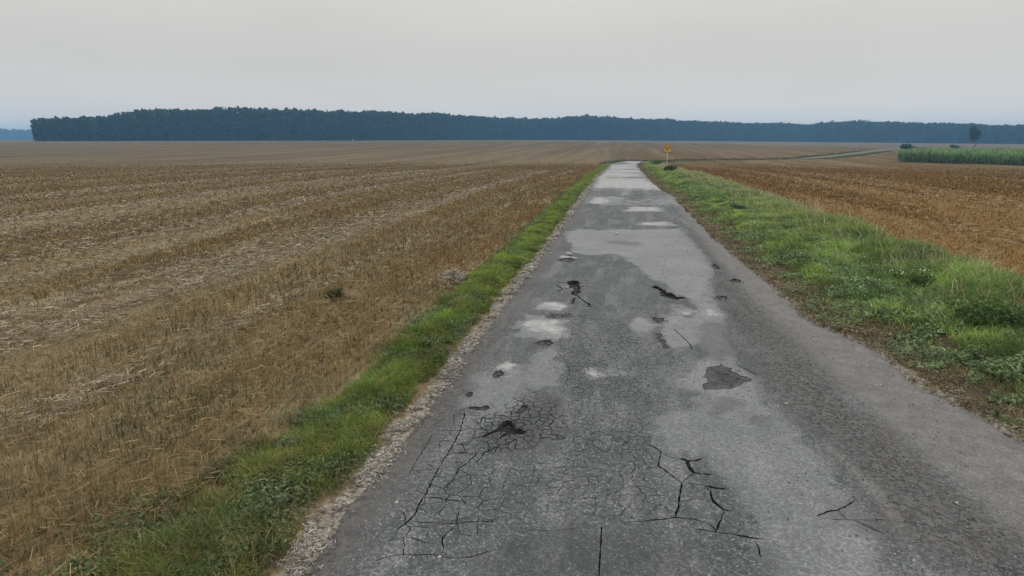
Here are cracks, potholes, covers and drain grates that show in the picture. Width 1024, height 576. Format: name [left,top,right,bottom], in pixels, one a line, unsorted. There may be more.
pothole [567,280,581,297]
crack [508,396,763,557]
pothole [652,285,686,300]
pothole [481,420,527,438]
crack [817,498,884,534]
crack [374,391,569,562]
pothole [702,363,752,390]
